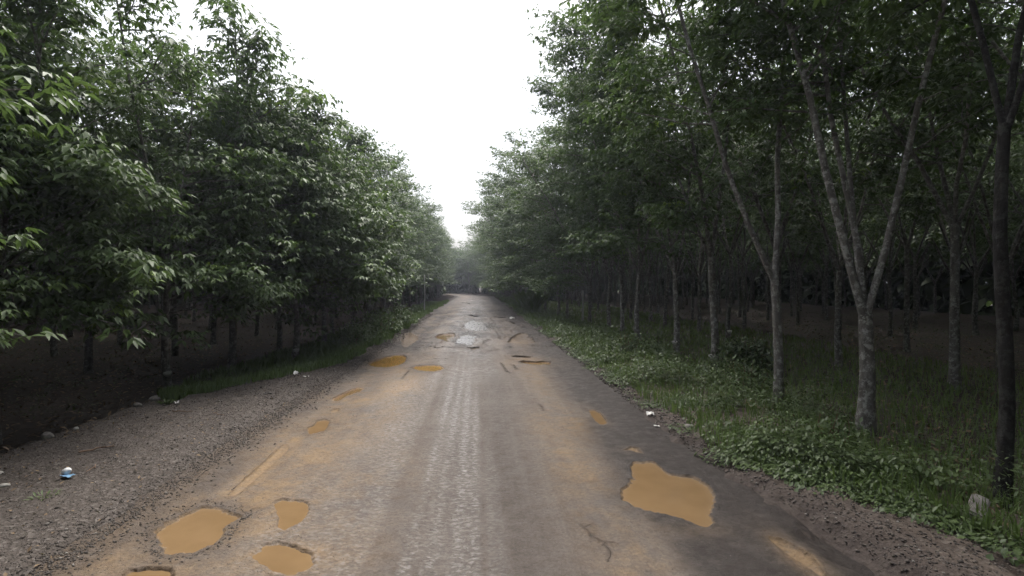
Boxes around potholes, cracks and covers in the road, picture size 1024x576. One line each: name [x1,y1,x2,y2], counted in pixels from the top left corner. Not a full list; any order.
pothole [112,564,183,576]
pothole [302,418,333,436]
pothole [269,496,316,534]
pothole [764,534,828,576]
pothole [366,354,410,368]
crack [399,303,523,389]
pothole [620,445,645,455]
crack [574,522,619,562]
pothole [432,332,460,342]
pothole [330,386,365,402]
